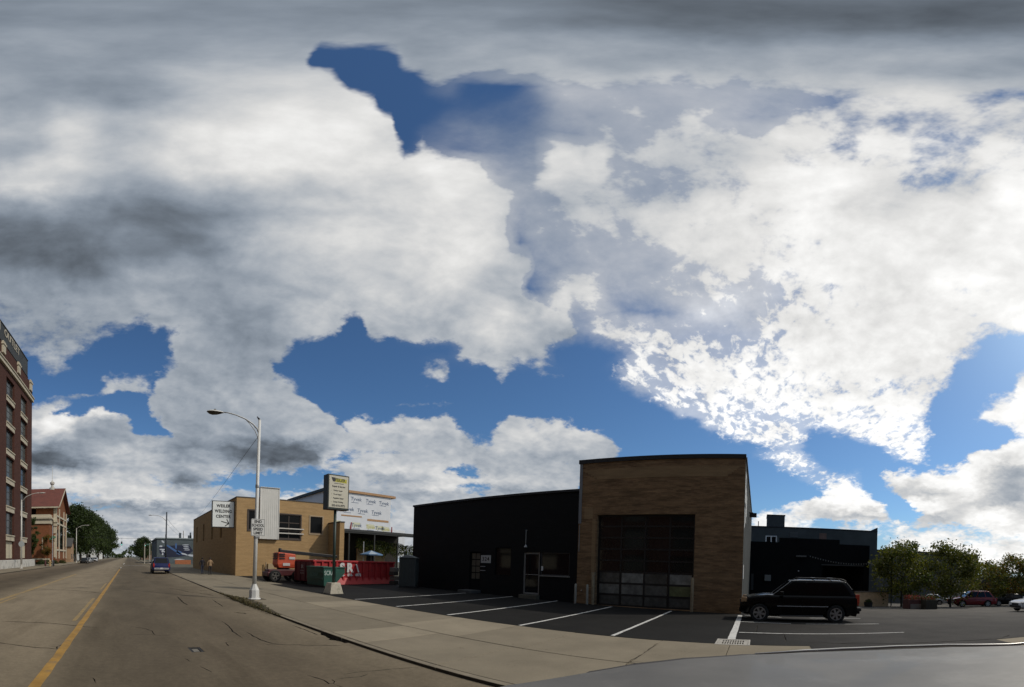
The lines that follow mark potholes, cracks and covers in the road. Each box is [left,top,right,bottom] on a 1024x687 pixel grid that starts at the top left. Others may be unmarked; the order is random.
crack [308,667,418,687]
crack [170,588,339,646]
